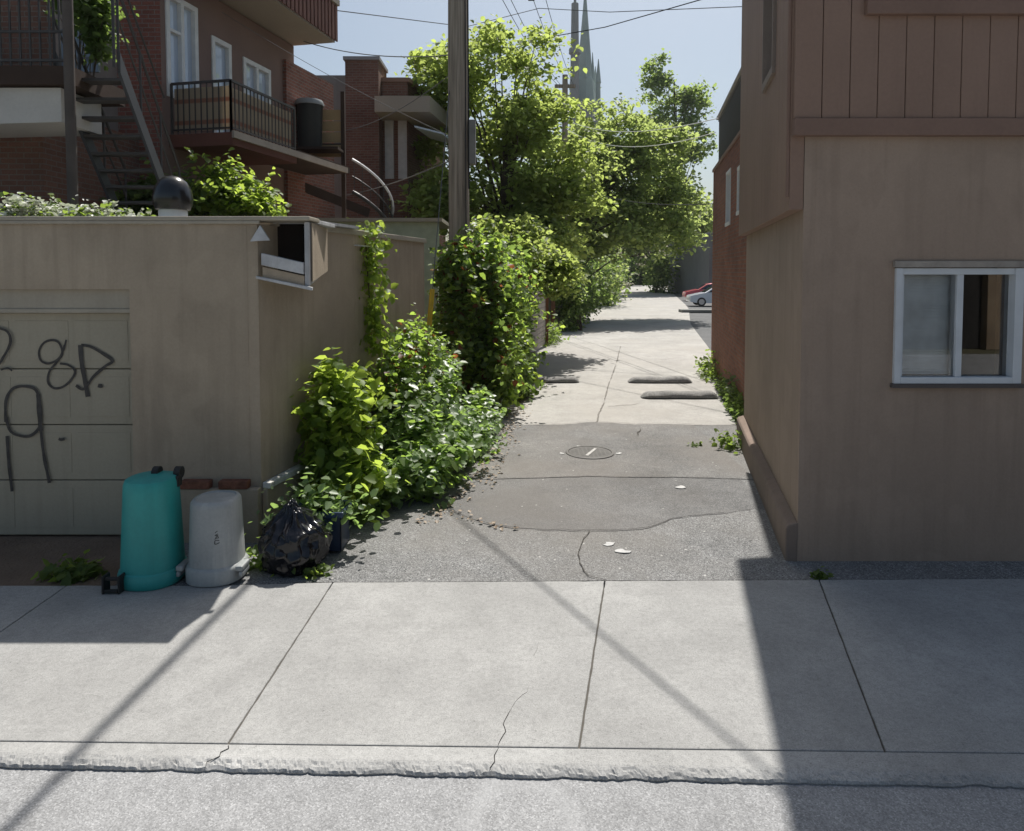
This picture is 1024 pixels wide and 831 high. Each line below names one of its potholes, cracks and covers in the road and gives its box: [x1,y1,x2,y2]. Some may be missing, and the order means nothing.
crack [597,346,637,422]
crack [578,530,606,580]
manhole cover [566,446,614,459]
